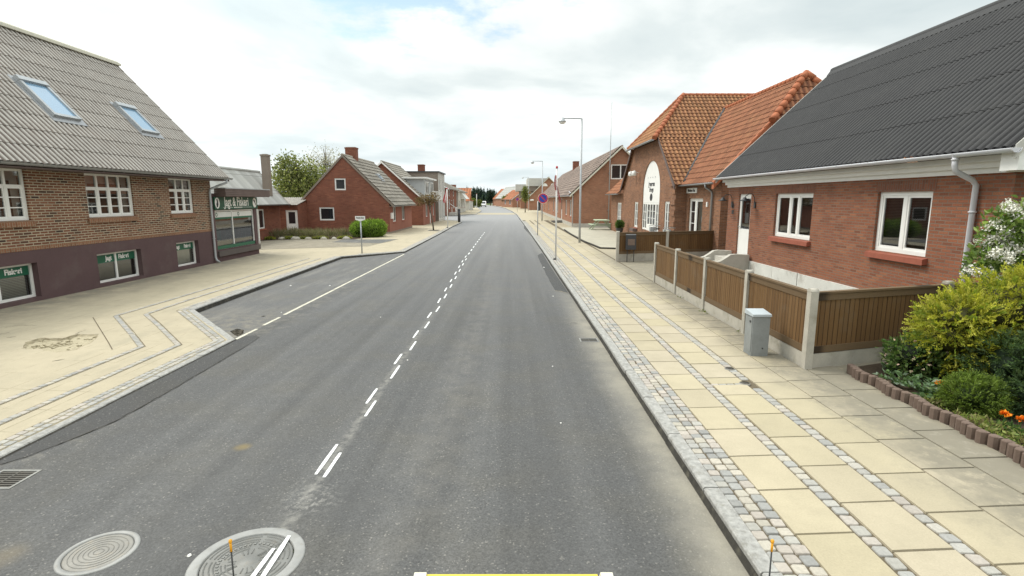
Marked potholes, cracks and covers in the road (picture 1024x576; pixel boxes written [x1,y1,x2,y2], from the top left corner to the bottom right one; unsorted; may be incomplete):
manhole cover [185,528,306,576]
drain grate [0,470,42,489]
manhole cover [53,531,141,576]
